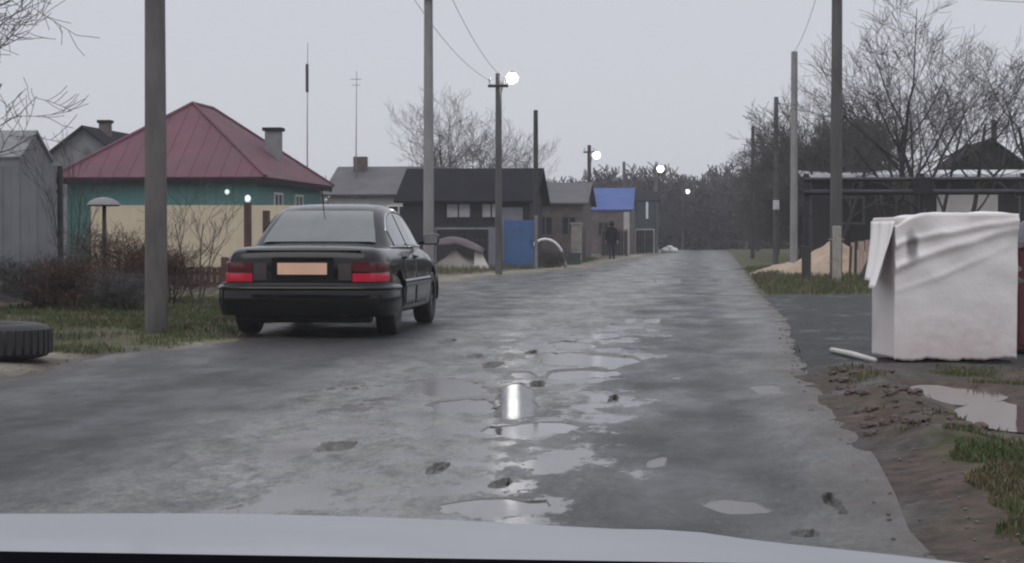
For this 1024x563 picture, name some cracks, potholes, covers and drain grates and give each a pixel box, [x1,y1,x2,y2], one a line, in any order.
pothole [491,383,540,419]
pothole [425,462,451,475]
pothole [488,477,513,489]
pothole [481,421,581,438]
pothole [820,492,849,514]
pothole [313,441,358,452]
pothole [645,455,668,468]
pothole [699,498,773,514]
pothole [436,497,551,518]
pothole [534,352,648,366]
pothole [749,384,784,395]
pothole [788,529,821,537]
